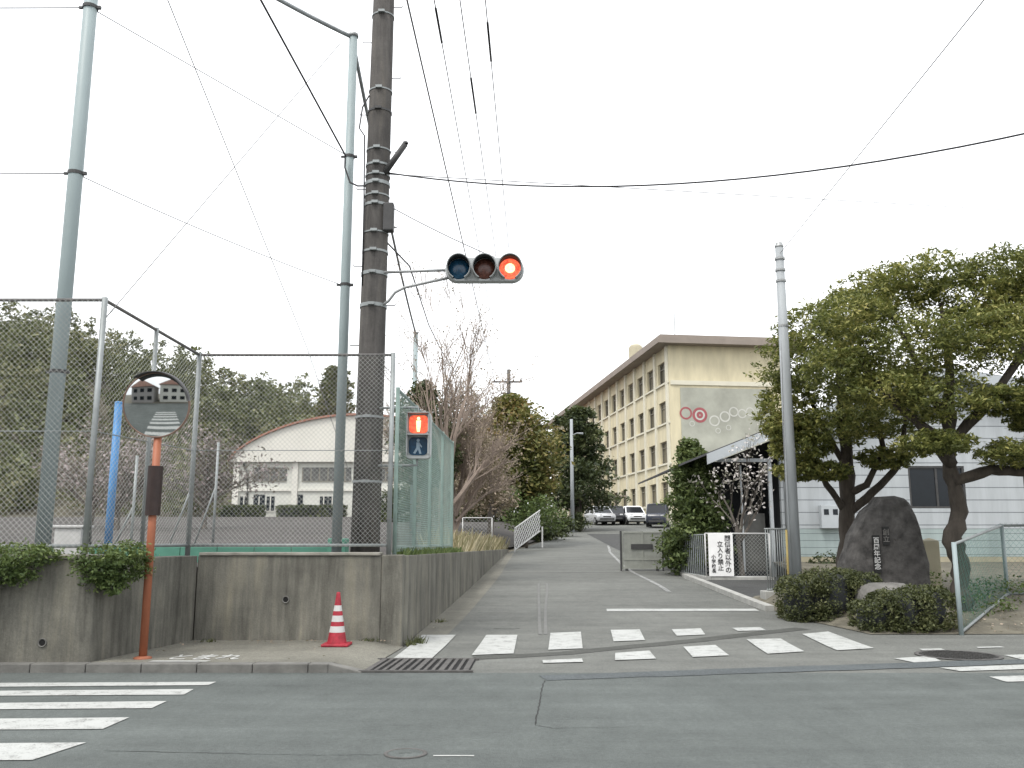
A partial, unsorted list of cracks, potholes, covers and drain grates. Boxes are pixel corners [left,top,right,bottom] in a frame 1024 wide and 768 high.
manhole cover [384,748,427,759]
drain grate [358,658,479,673]
manhole cover [914,650,1004,660]
